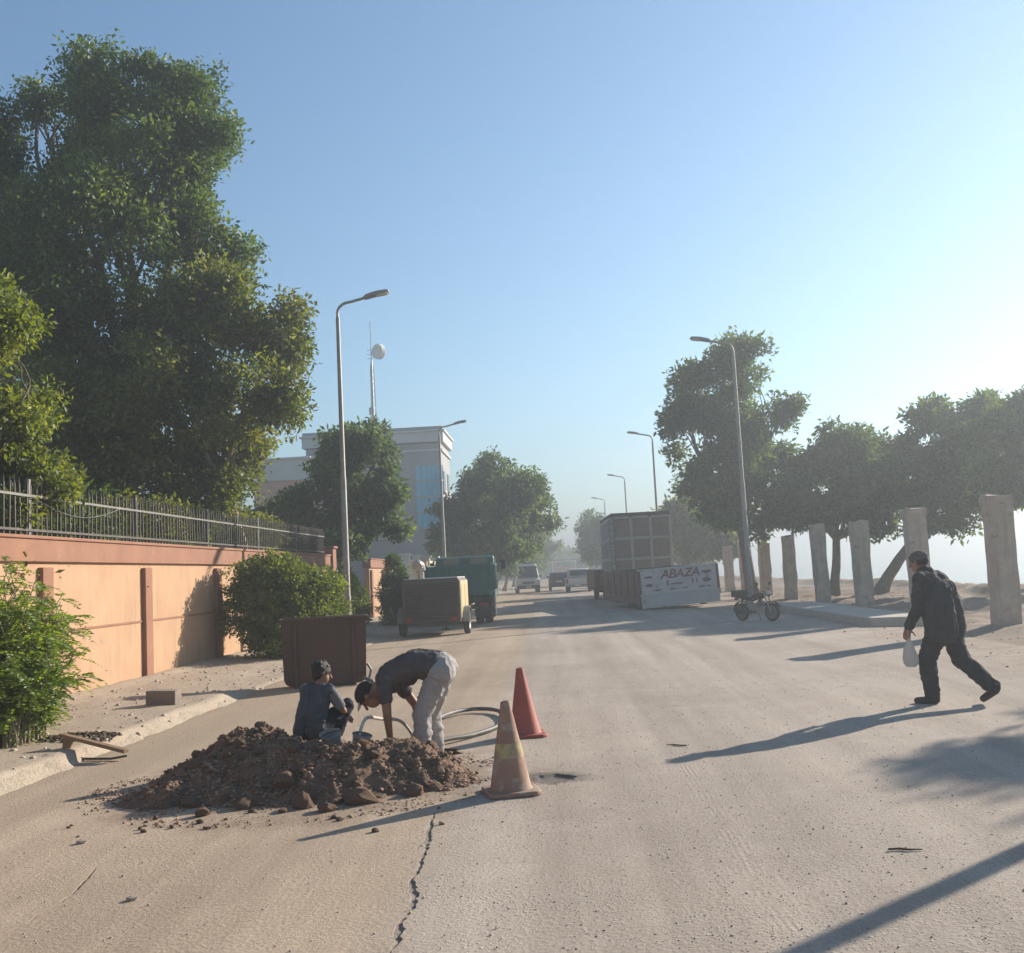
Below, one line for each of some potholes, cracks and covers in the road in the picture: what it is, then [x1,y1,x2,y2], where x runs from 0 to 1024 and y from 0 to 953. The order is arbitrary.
crack [389,813,435,953]
pothole [531,773,577,785]
